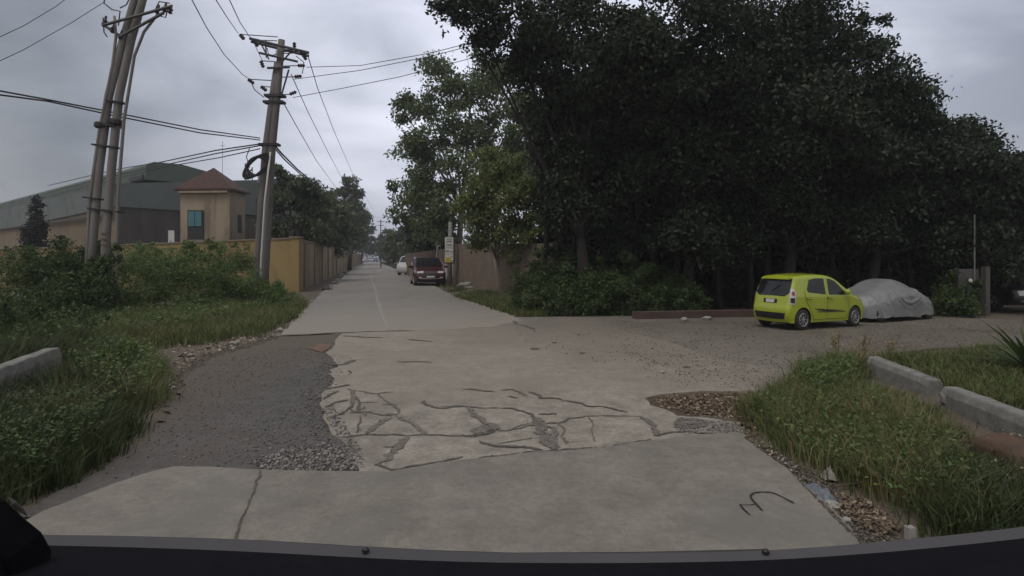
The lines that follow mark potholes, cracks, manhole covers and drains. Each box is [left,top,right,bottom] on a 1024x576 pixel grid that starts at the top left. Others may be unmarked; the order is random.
crack [323,359,737,469]
pothole [674,418,708,429]
